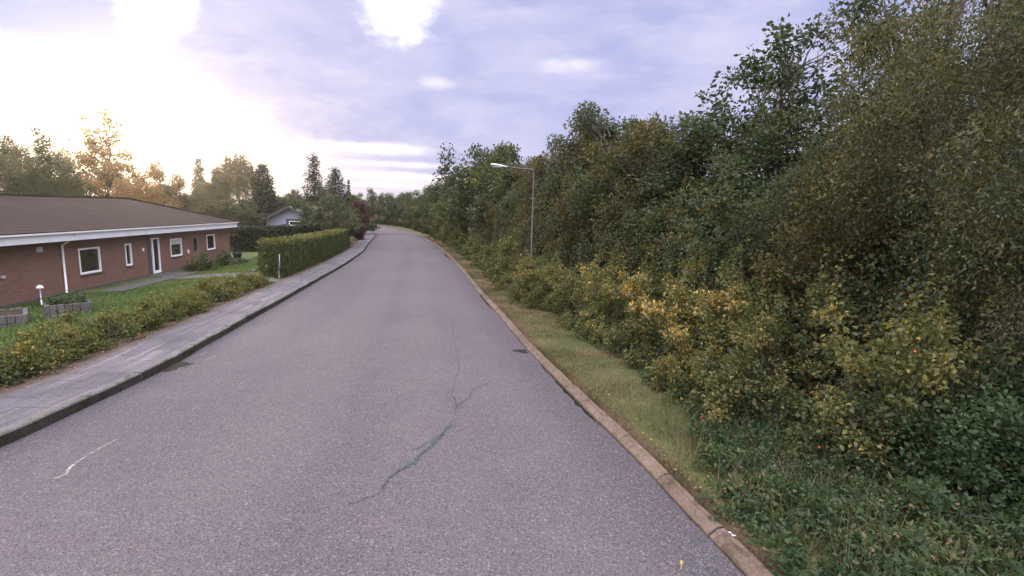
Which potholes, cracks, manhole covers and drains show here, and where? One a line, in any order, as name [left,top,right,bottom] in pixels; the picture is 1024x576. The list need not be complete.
drain grate [160,361,193,373]
